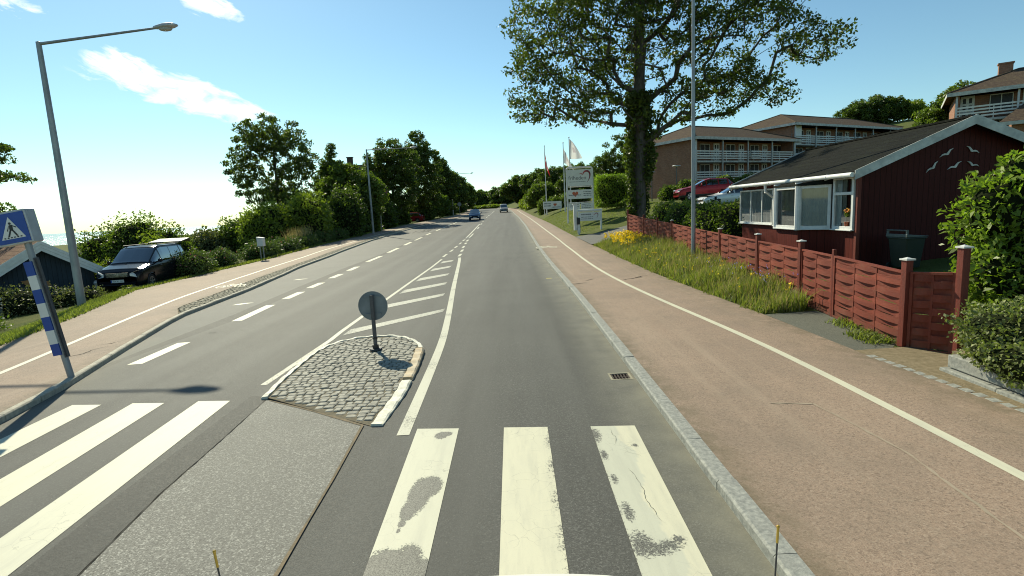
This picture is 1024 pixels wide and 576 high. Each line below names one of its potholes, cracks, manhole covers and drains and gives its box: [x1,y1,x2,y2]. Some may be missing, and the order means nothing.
drain grate [607,372,633,380]
